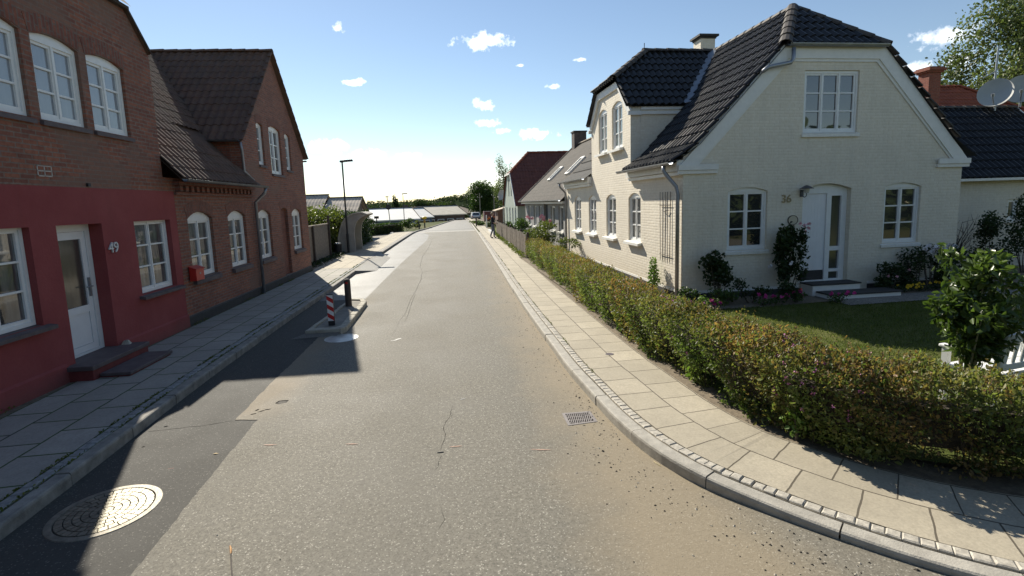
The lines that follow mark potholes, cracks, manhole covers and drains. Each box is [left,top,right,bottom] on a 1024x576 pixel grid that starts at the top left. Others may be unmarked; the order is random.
manhole cover [42,484,163,543]
drain grate [562,411,598,426]
